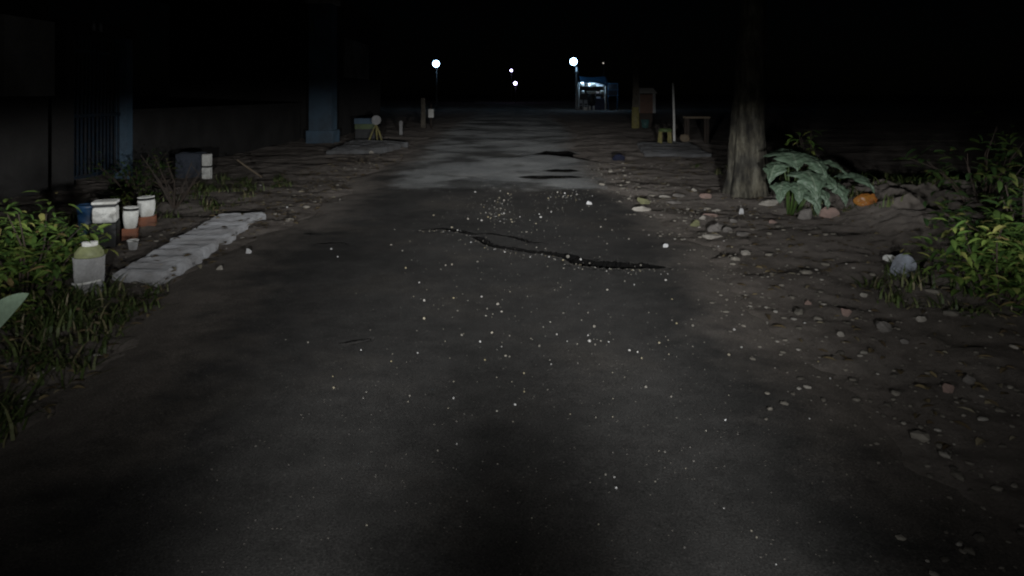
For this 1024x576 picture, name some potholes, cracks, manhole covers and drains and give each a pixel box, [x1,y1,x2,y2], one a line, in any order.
crack [420,228,670,271]
pothole [535,151,598,162]
crack [338,338,371,346]
